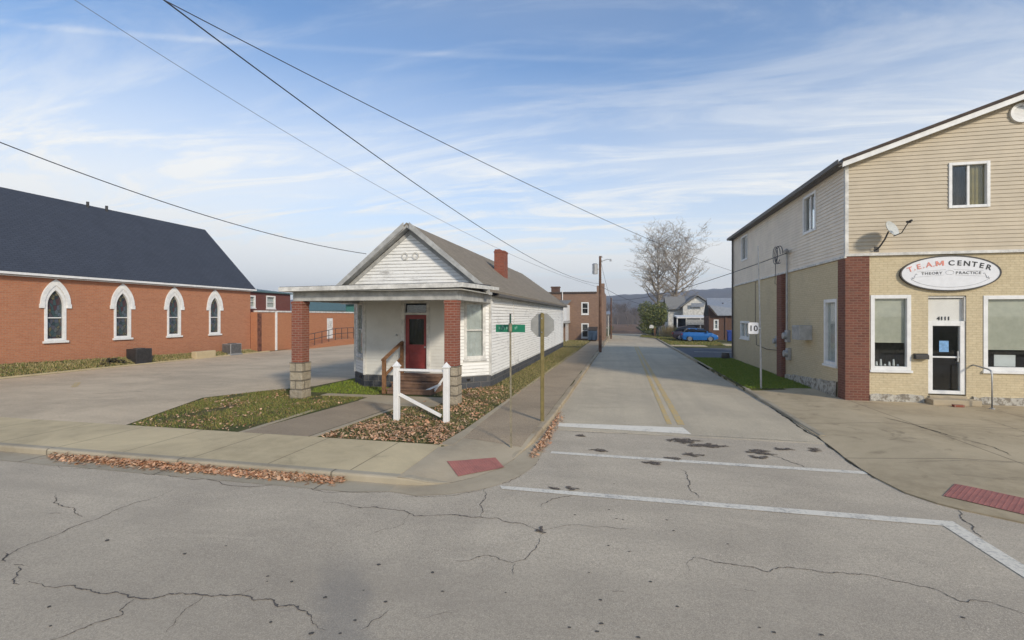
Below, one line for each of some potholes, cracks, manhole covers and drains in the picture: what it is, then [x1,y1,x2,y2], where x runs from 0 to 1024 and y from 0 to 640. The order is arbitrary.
crack [3,490,172,559]
crack [1,553,324,640]
crack [688,557,1024,614]
crack [332,490,626,571]
